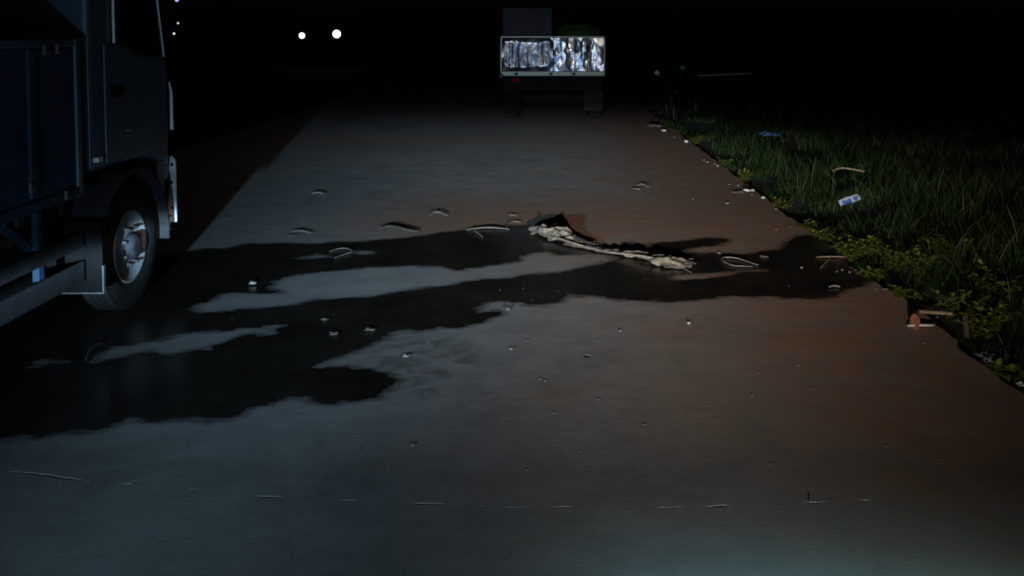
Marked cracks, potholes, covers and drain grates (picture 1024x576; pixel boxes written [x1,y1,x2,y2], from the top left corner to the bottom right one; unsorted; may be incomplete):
crack [8,471,870,508]
